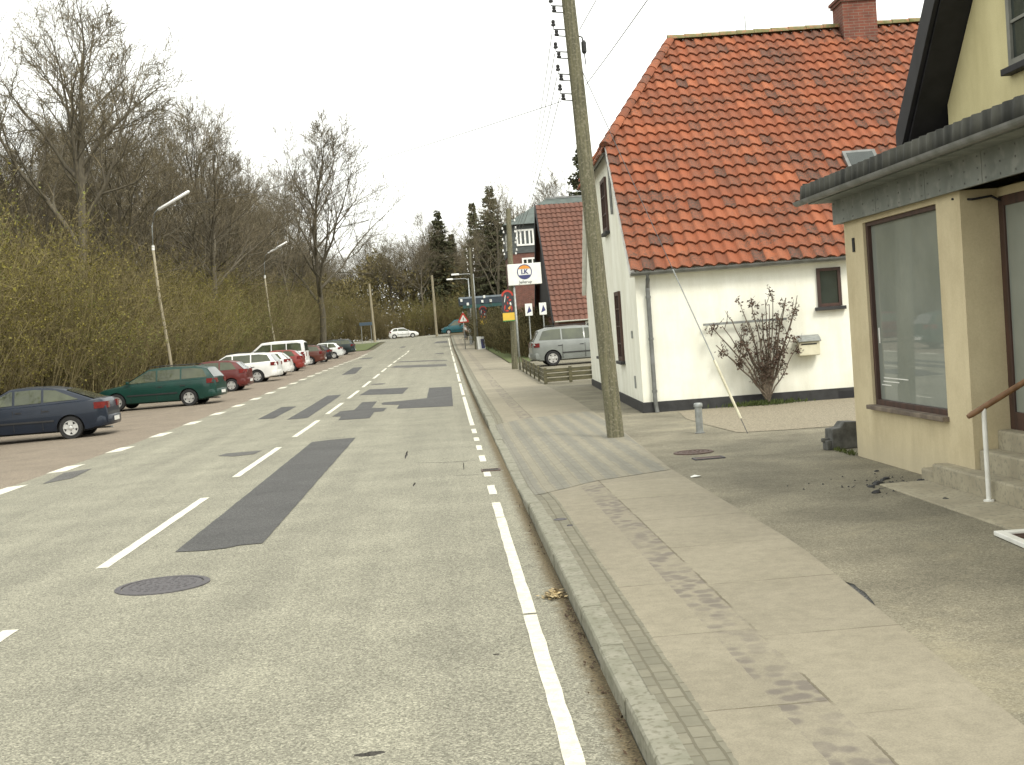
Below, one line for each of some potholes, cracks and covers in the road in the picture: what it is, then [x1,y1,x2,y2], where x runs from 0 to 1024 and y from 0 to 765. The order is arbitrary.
manhole cover [114,575,210,596]
